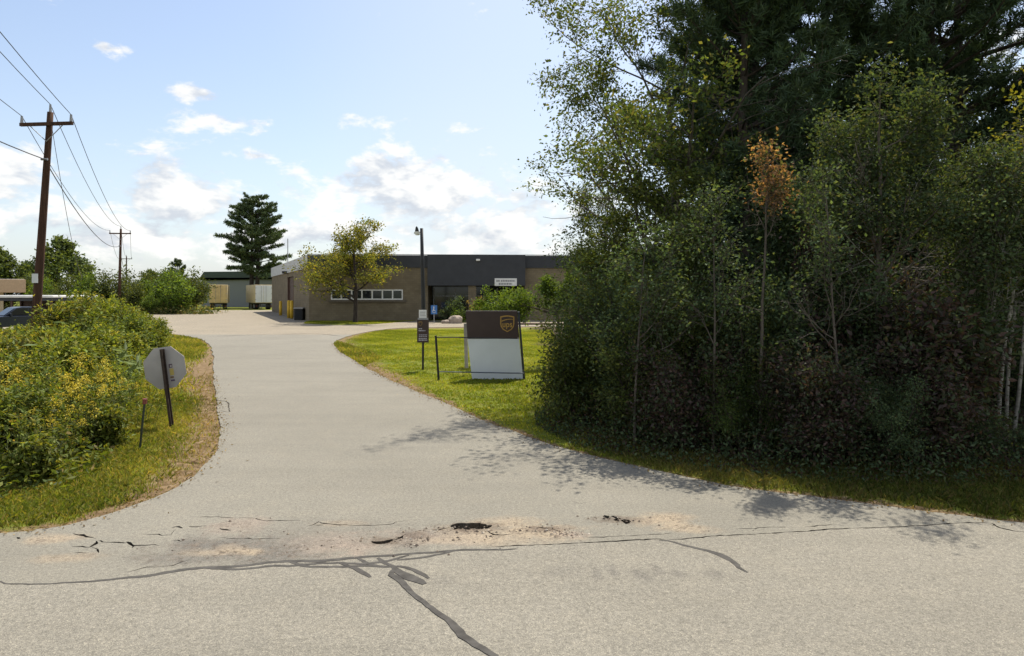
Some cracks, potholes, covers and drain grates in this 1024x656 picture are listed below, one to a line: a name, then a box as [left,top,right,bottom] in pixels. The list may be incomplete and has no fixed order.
crack [75,526,200,553]
